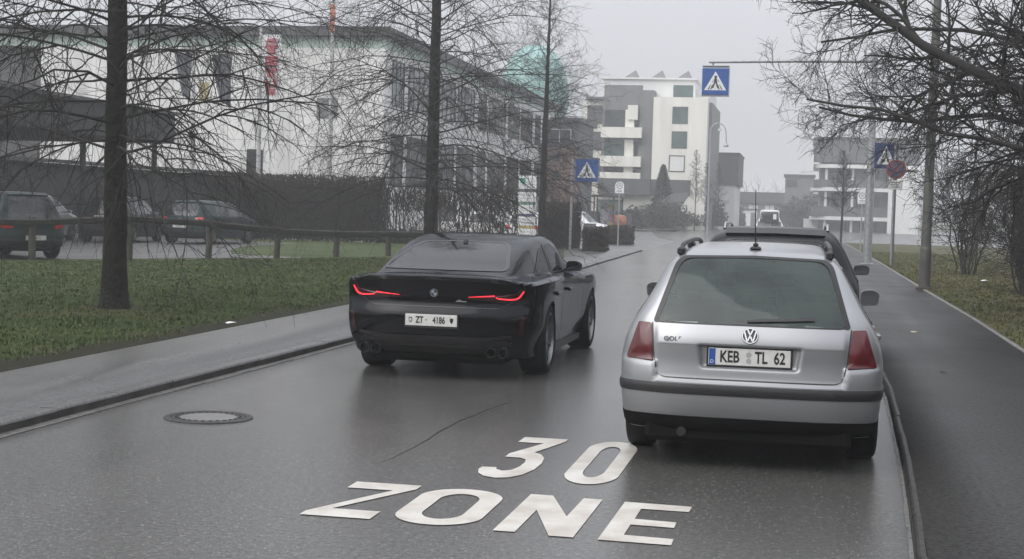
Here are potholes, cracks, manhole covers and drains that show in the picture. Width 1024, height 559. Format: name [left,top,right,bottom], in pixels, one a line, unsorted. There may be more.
manhole cover [163,410,253,424]
crack [376,401,509,464]
